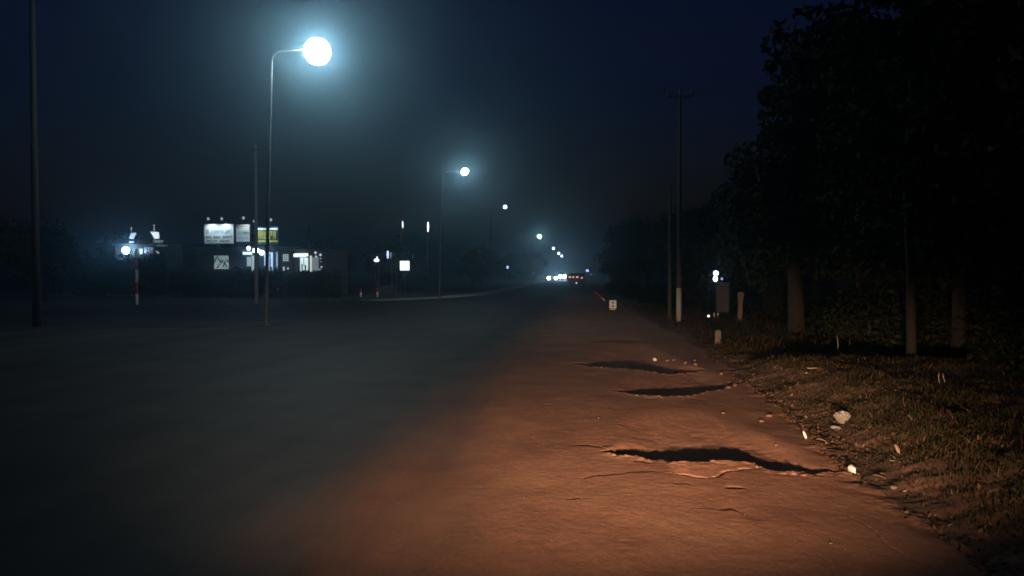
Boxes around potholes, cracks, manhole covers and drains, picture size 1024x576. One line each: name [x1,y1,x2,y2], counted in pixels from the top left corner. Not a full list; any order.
pothole [602,380,742,397]
pothole [598,443,848,475]
pothole [571,361,707,375]
